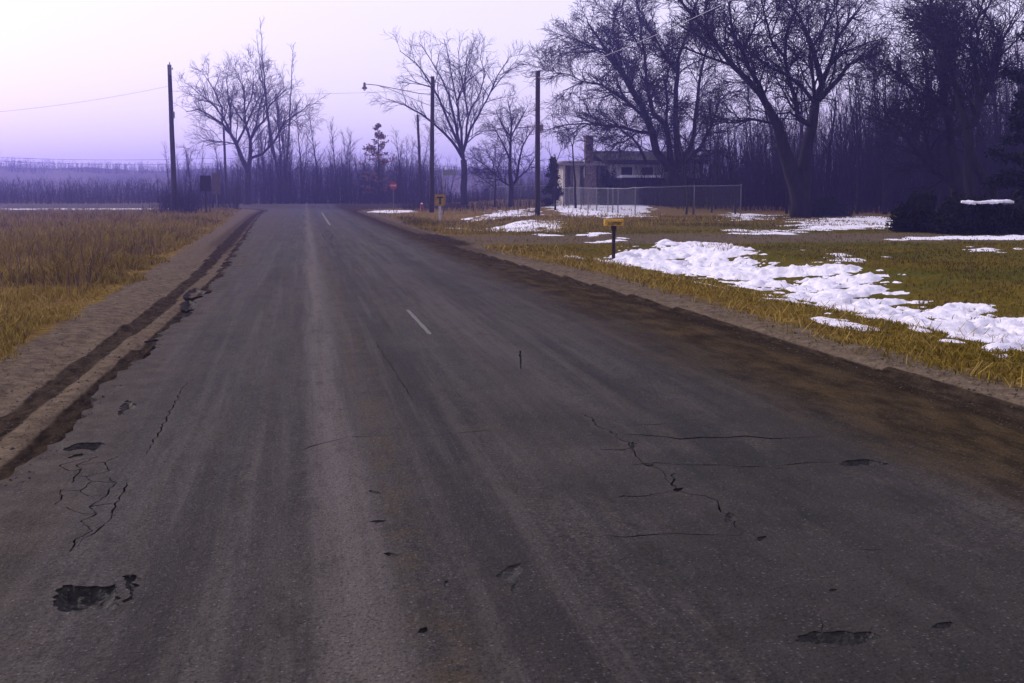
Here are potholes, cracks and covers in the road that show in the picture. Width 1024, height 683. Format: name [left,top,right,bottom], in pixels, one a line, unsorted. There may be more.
pothole [795,618,881,646]
crack [59,381,187,551]
crack [303,430,490,450]
pothole [118,400,136,416]
pothole [64,442,104,458]
pothole [183,288,207,301]
pothole [496,563,524,595]
pothole [52,574,146,612]
pothole [179,300,197,313]
pothole [841,459,888,467]
crack [584,413,821,538]
